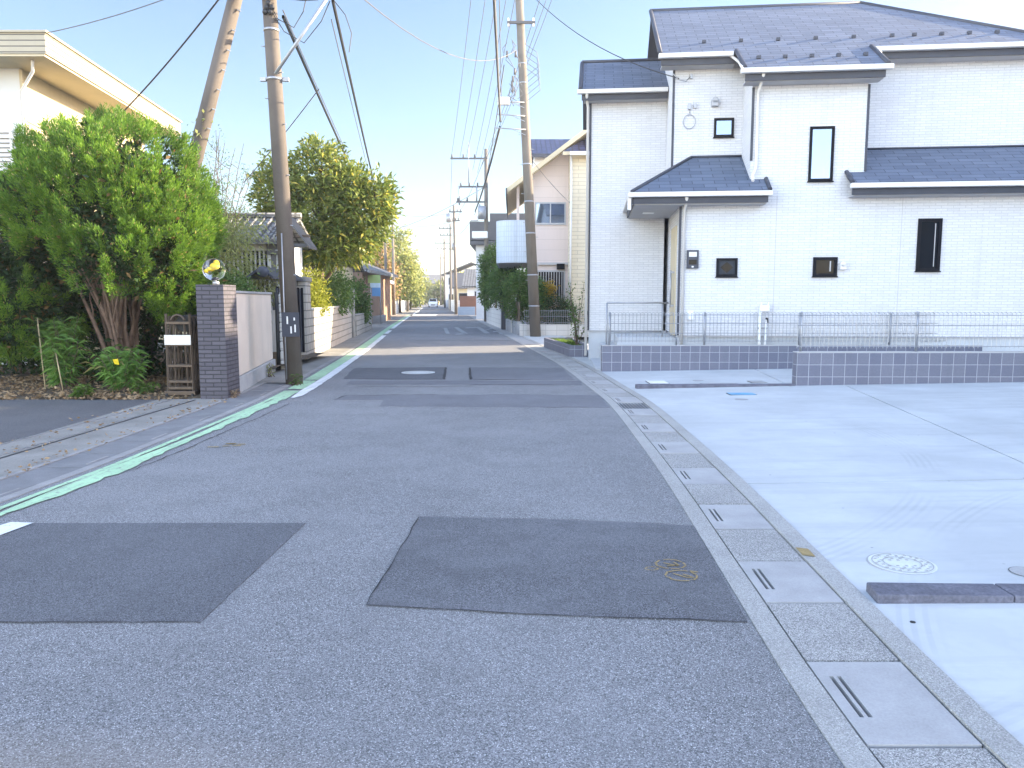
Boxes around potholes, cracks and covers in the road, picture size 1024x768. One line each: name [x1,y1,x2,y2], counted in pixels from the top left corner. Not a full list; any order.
manhole cover [866,552,938,575]
